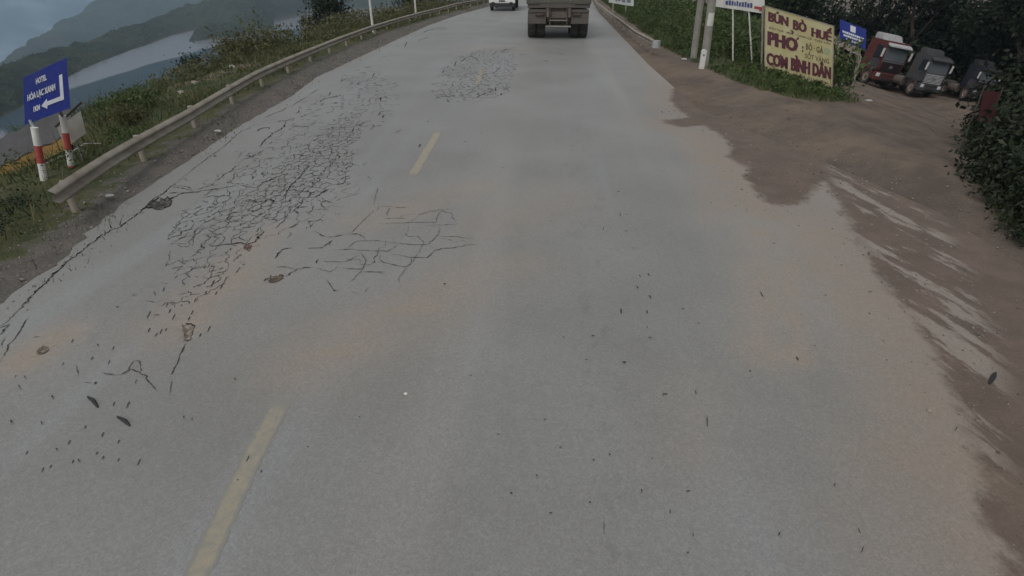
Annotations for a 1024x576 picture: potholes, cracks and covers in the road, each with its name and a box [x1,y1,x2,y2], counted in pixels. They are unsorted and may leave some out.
pothole [146,196,172,210]
pothole [182,323,195,341]
crack [0,71,479,359]
crack [432,47,522,102]
crack [76,345,185,396]
